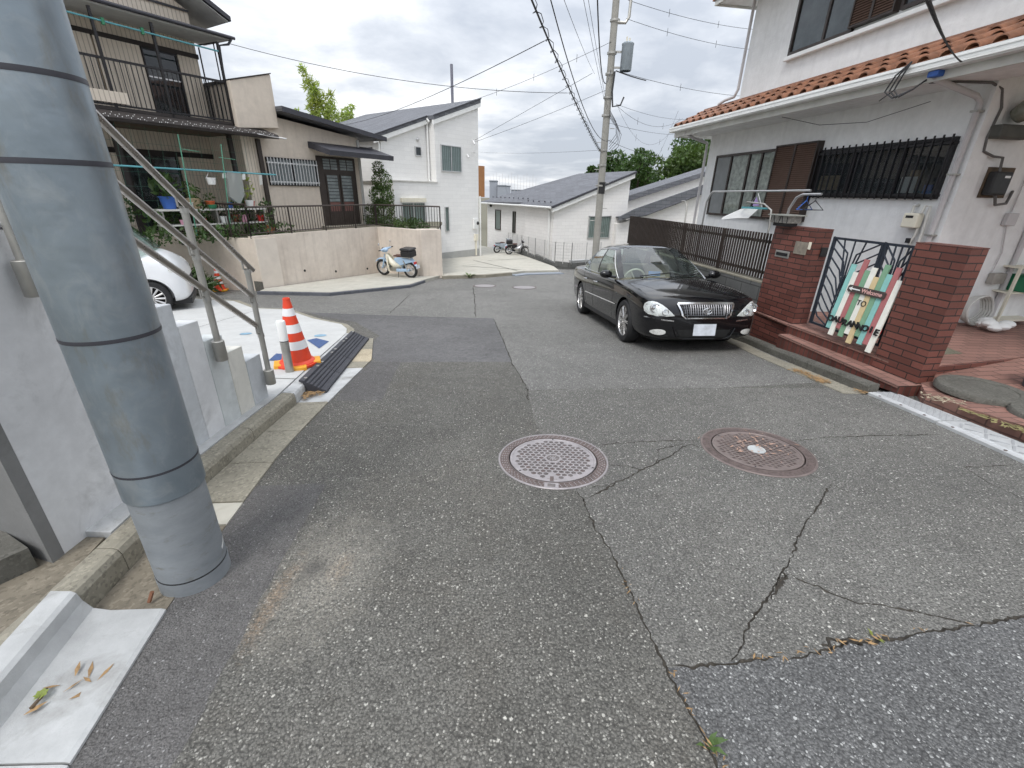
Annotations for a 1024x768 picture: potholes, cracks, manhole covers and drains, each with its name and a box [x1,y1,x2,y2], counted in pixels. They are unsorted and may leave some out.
crack [576,440,1024,768]
manhole cover [498,434,609,490]
manhole cover [700,427,818,478]
